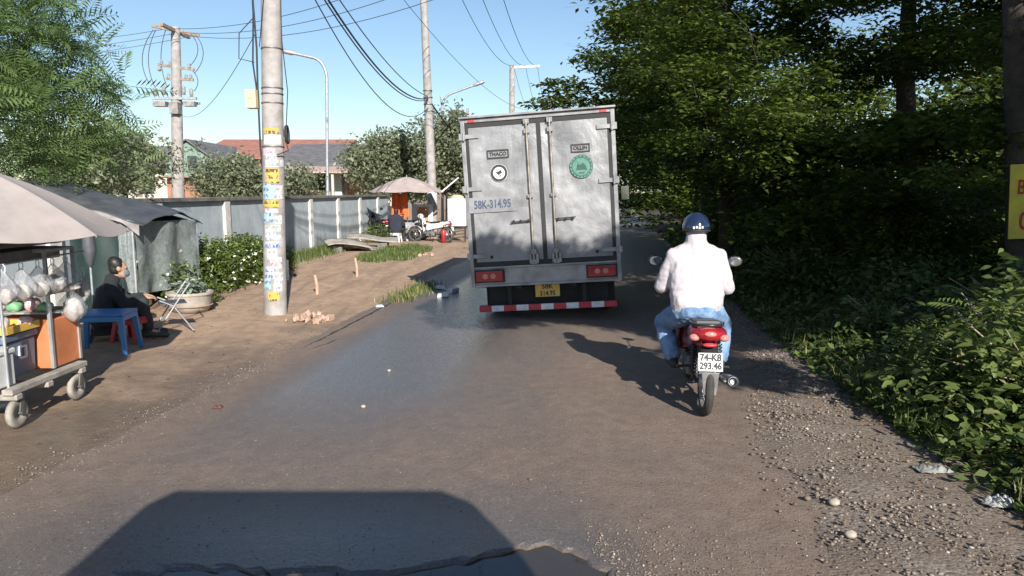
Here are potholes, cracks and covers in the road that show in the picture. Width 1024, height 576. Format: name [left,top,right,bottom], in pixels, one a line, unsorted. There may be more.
crack [305,301,394,348]
pothole [108,539,618,576]
